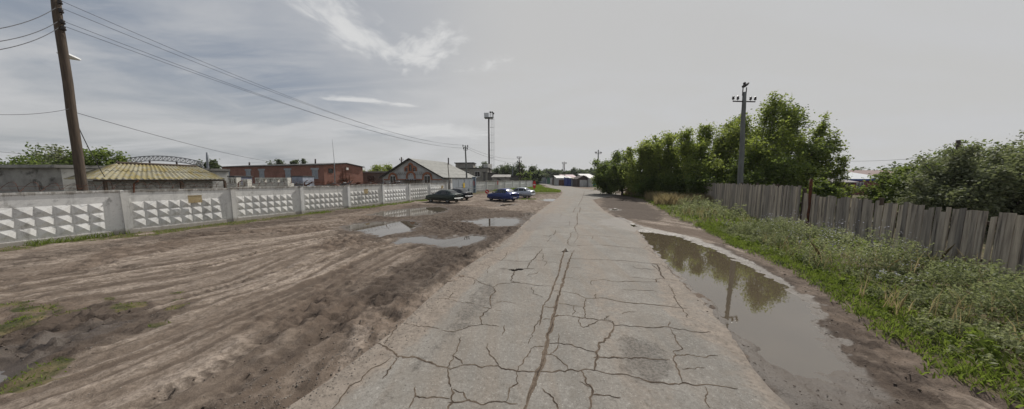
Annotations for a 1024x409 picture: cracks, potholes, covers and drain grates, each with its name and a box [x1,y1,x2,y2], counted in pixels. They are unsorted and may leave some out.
crack [332,191,737,409]
